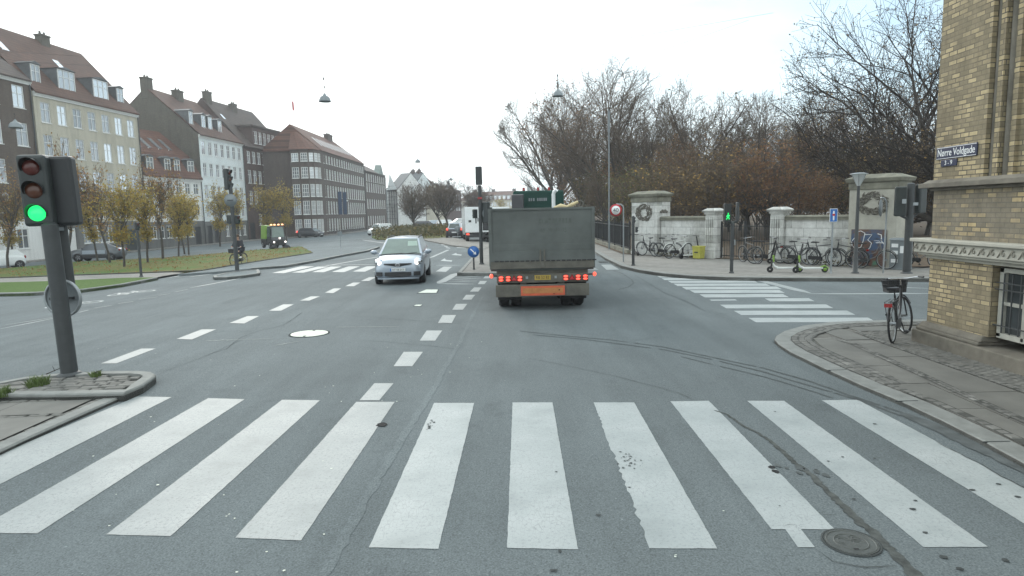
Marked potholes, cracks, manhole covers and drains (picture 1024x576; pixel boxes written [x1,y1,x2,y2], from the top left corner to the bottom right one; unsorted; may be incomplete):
manhole cover [821,528,883,557]
